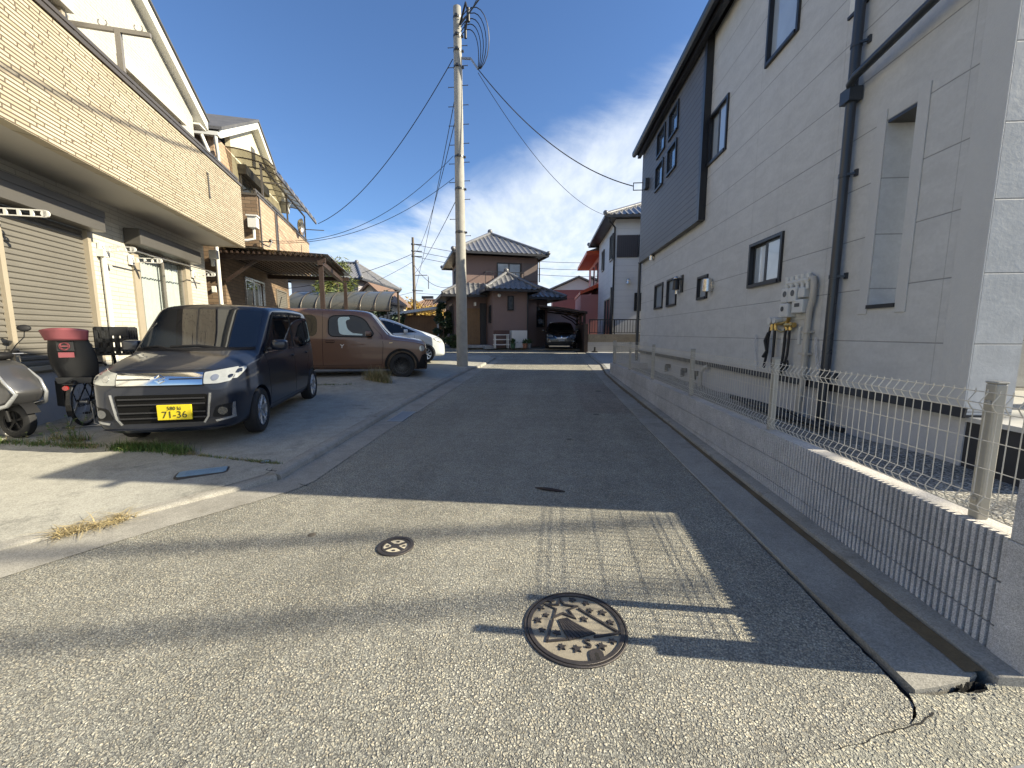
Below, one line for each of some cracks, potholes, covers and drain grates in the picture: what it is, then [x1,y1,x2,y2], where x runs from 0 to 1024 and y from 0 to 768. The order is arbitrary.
manhole cover [377,536,414,557]
manhole cover [524,592,628,669]
